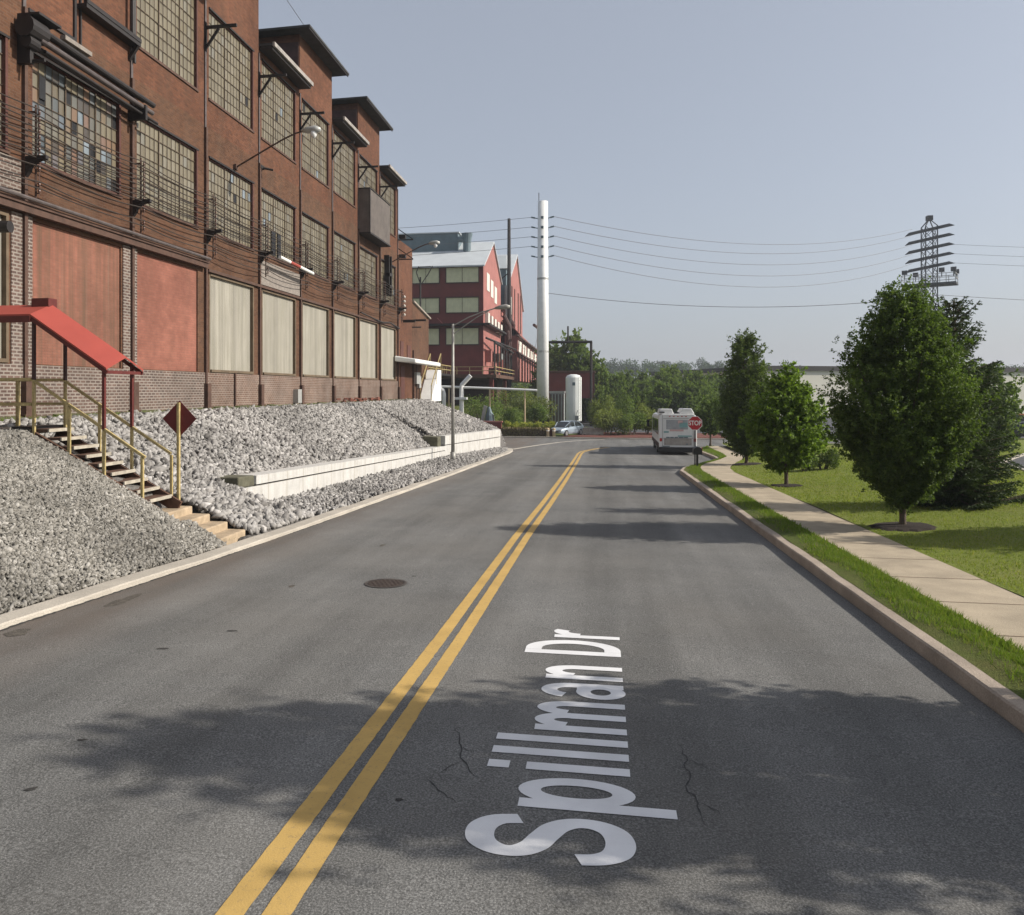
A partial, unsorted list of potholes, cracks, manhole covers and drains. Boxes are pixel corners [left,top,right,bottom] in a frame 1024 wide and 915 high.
crack [682,748,719,827]
crack [428,727,476,802]
manhole cover [365,578,407,588]
